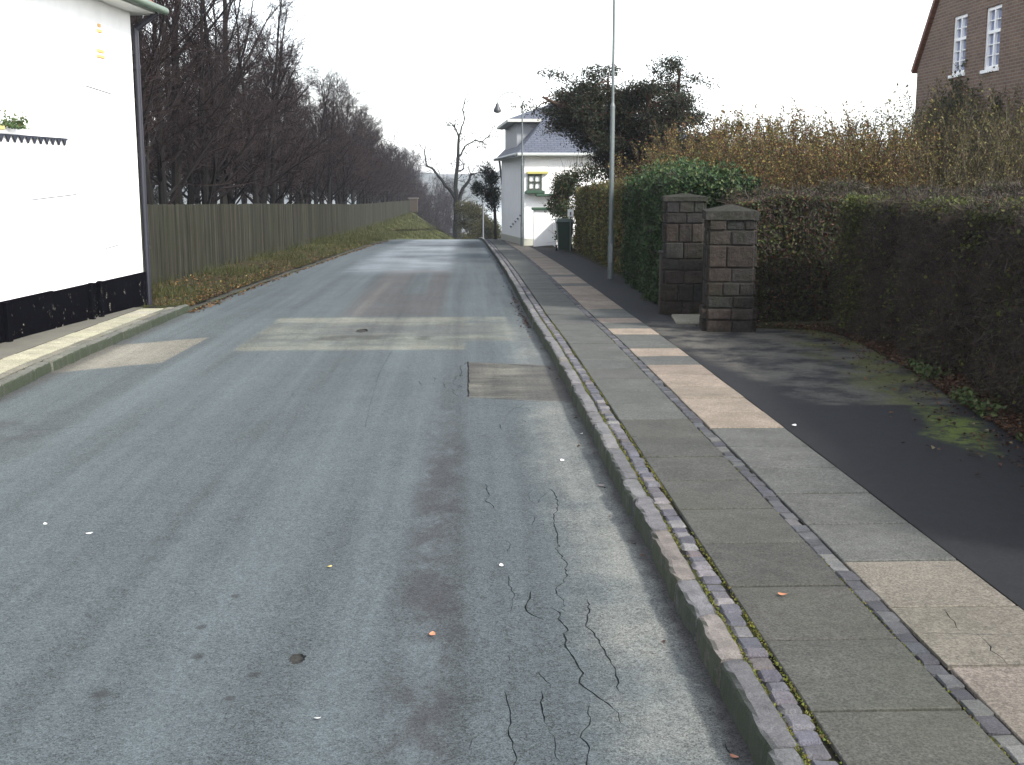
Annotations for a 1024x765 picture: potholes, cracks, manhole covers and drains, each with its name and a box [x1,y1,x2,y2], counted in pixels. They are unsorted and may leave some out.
crack [925,612,1006,663]
crack [500,679,517,765]
crack [508,489,625,765]
pothole [289,653,306,664]
